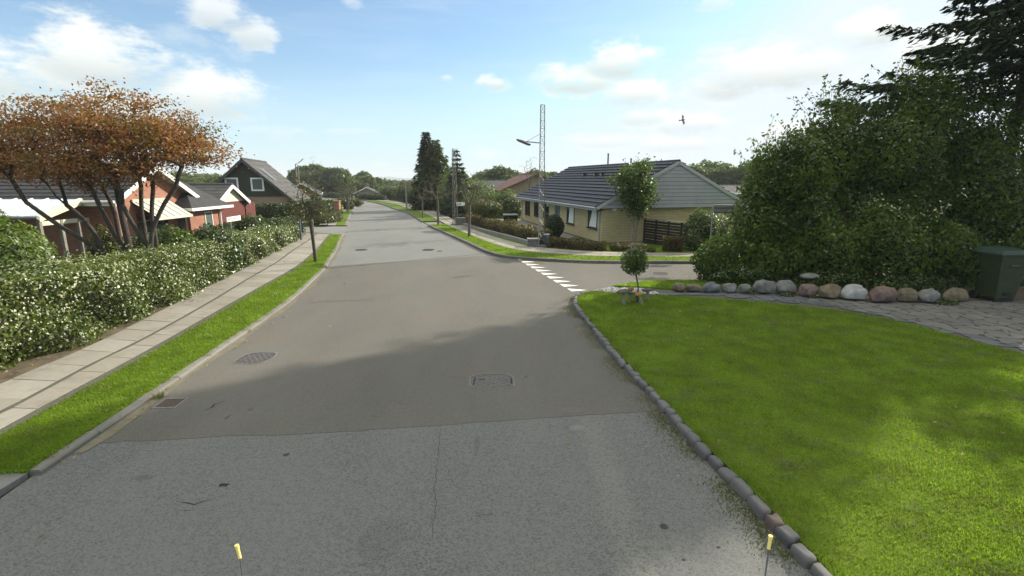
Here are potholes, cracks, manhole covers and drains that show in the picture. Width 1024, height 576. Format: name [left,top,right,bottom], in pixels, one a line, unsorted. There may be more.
manhole cover [232,352,278,364]
drain grate [150,397,189,409]
manhole cover [469,373,515,389]
crack [432,428,441,538]
